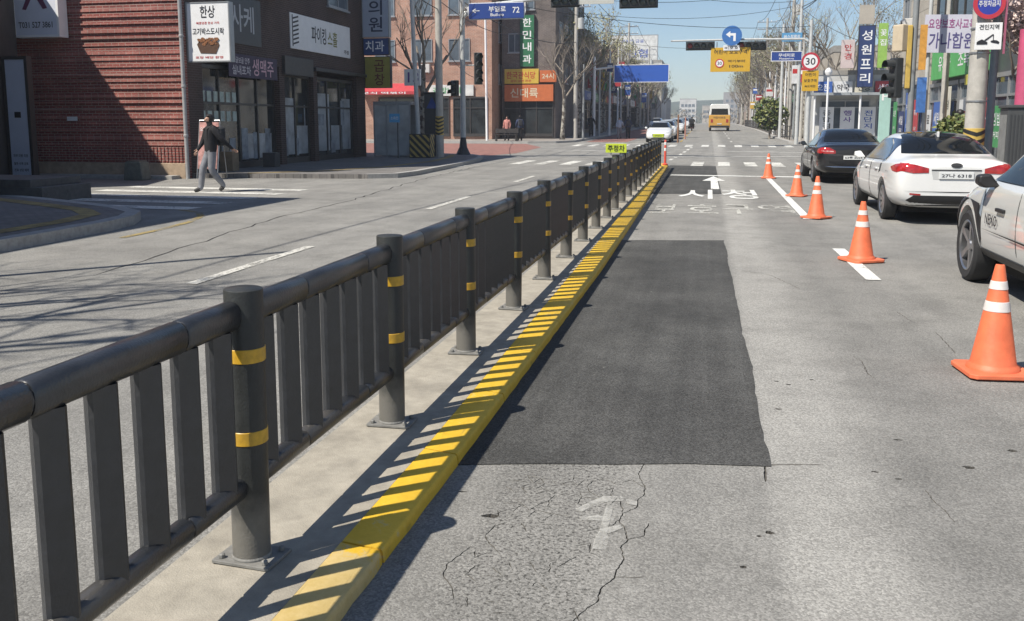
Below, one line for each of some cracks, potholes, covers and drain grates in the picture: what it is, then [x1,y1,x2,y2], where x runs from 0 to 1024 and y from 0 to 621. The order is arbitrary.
crack [443,464,649,621]
